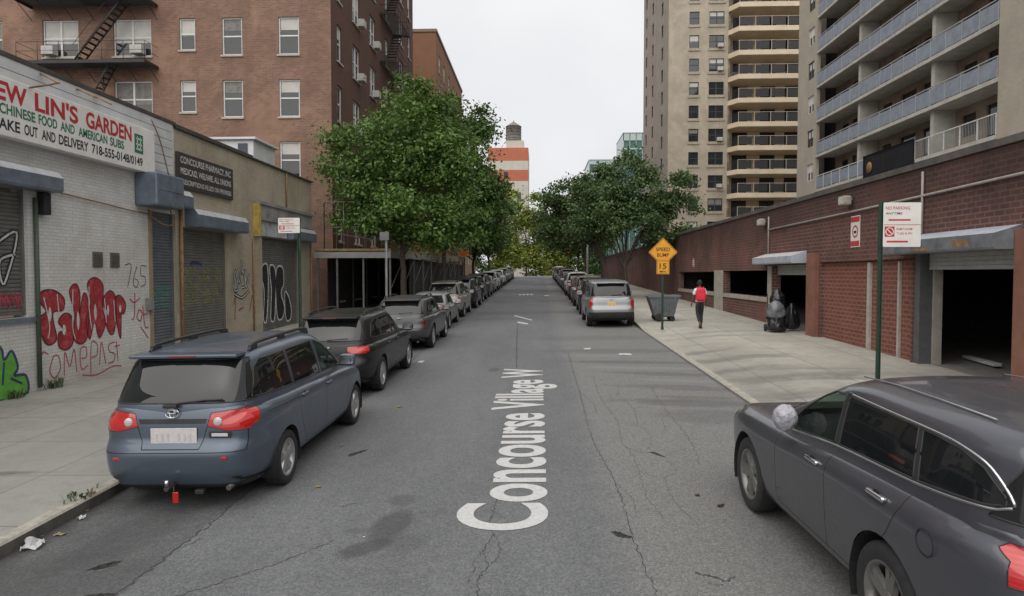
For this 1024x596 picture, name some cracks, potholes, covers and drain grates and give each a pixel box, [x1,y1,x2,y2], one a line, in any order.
crack [568,352,699,596]
pothole [88,561,121,571]
crack [467,502,503,596]
